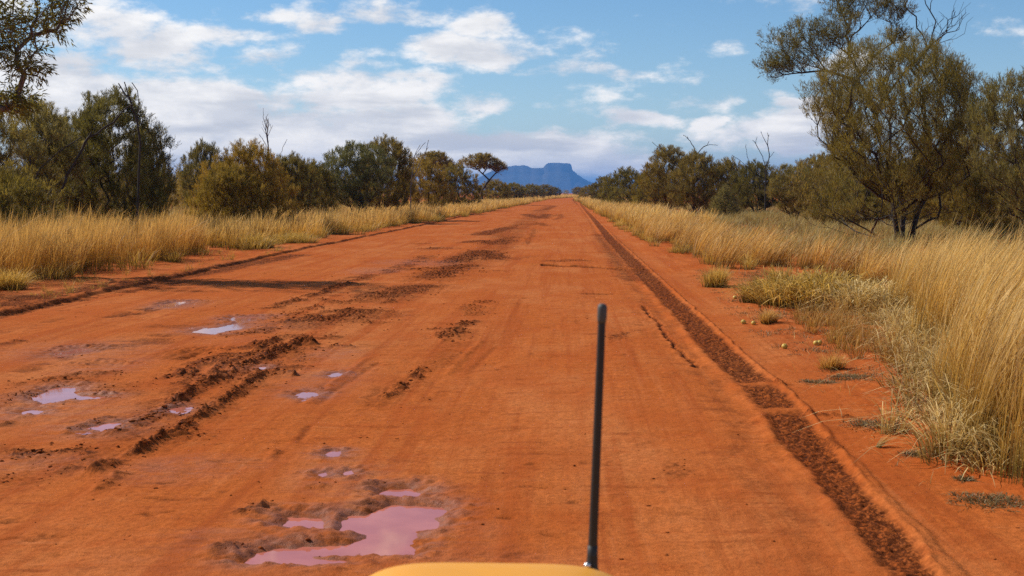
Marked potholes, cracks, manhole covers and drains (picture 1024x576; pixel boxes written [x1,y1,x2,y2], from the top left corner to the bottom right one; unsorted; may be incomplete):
pothole [155,402,194,416]
pothole [3,381,122,416]
pothole [65,417,139,435]
pothole [212,478,471,568]
pothole [177,313,275,335]
pothole [309,446,355,459]
pothole [315,369,356,379]
crack [638,304,706,370]
pothole [281,387,334,401]
